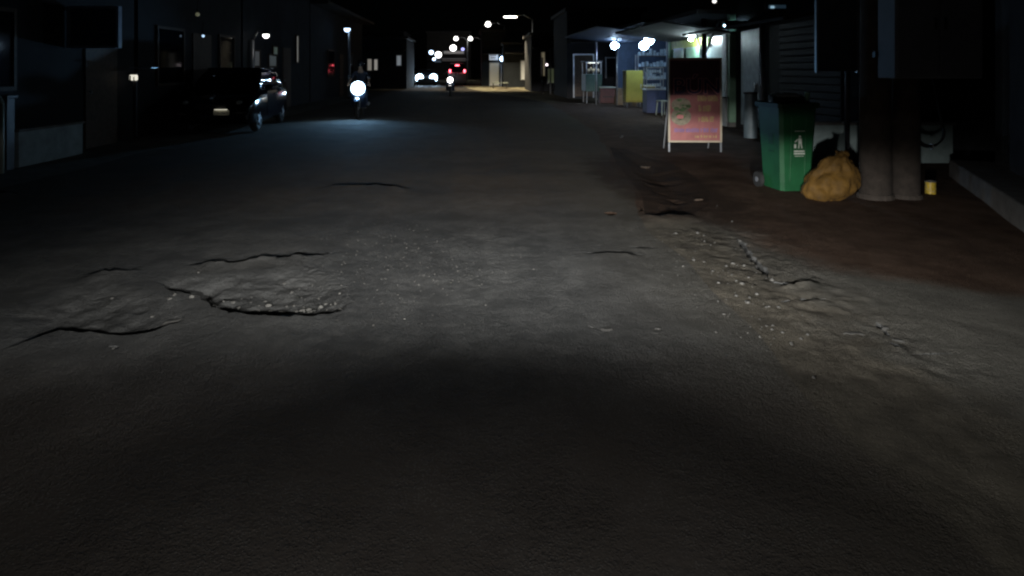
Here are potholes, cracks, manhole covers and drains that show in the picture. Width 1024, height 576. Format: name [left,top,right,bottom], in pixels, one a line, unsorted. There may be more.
pothole [156,265,353,317]
crack [876,322,960,355]
crack [737,239,826,302]
